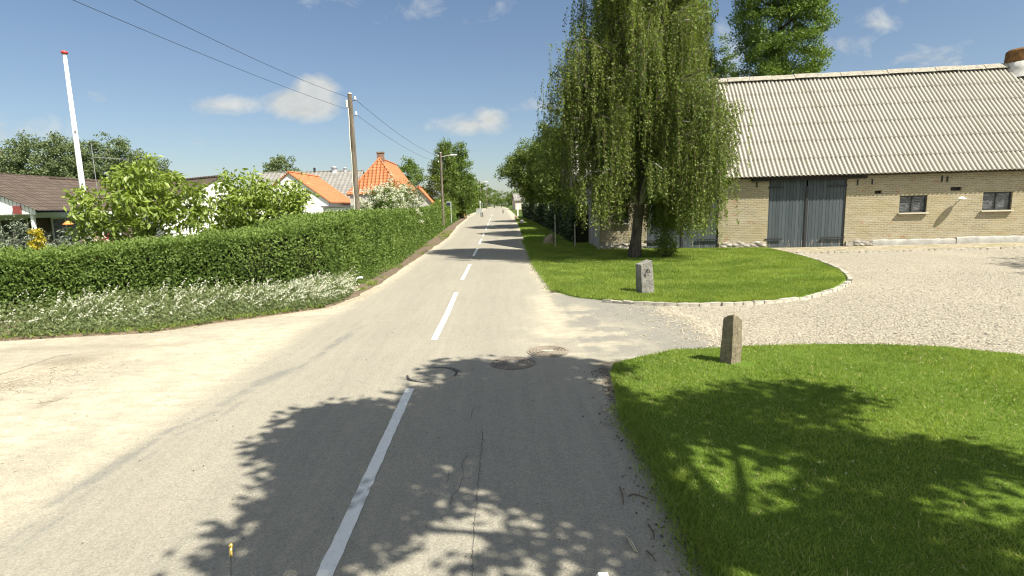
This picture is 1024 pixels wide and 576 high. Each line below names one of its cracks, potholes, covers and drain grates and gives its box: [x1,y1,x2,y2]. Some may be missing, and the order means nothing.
crack [0,354,97,404]
crack [447,406,485,576]
manhole cover [527,346,570,357]
manhole cover [490,356,536,370]
